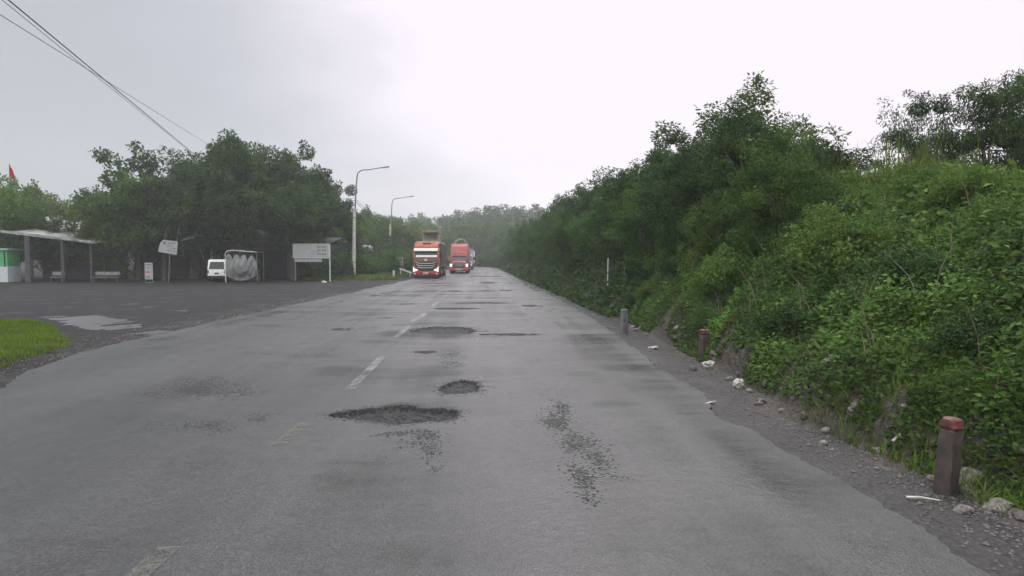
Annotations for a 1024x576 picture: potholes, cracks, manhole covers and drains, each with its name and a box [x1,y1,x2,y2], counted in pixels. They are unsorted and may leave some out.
pothole [121,375,274,401]
pothole [310,401,477,428]
pothole [421,377,497,398]
pothole [394,325,493,336]
